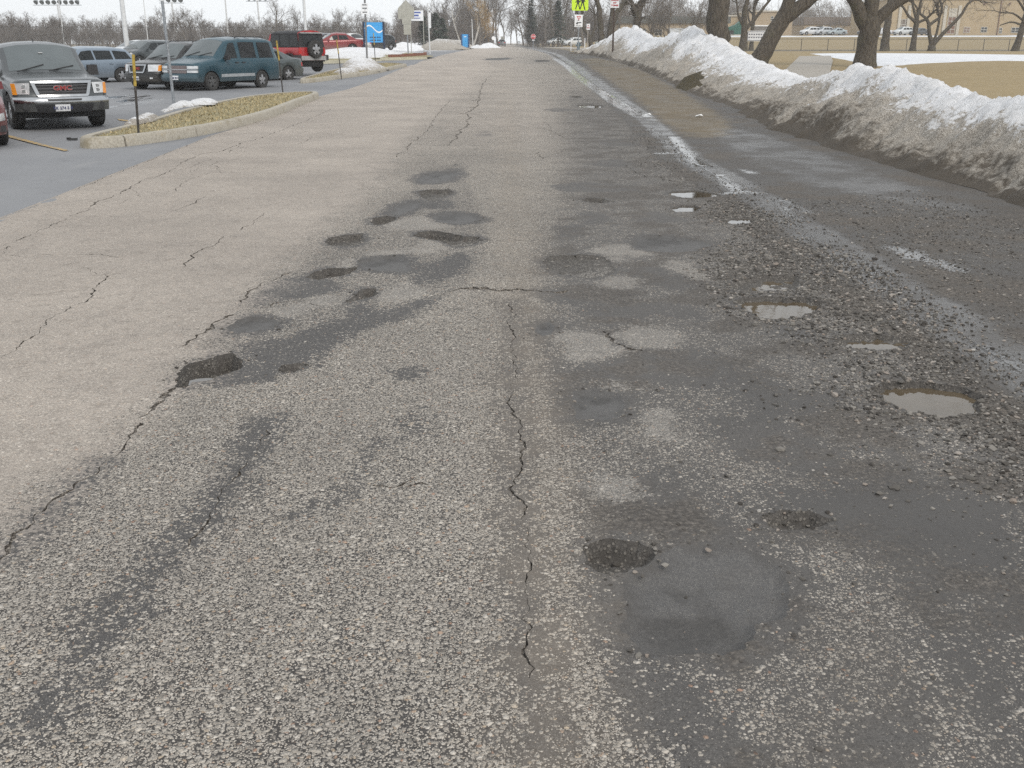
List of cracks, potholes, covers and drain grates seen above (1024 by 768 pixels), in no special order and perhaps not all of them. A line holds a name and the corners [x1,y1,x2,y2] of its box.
pothole [582,538,657,574]
pothole [836,333,918,351]
pothole [668,190,718,198]
pothole [175,353,243,388]
crack [602,330,643,351]
pothole [733,296,830,319]
pothole [871,381,985,417]
crack [450,286,568,294]
pothole [760,510,834,531]
crack [1,111,326,358]
